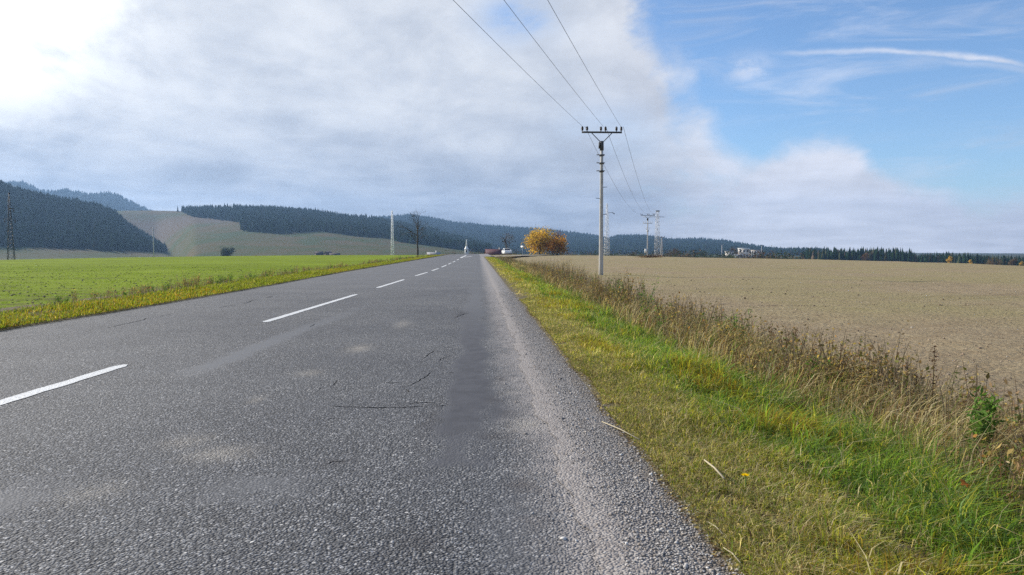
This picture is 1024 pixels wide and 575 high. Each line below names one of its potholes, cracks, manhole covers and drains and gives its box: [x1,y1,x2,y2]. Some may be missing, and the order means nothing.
crack [316,351,453,419]
